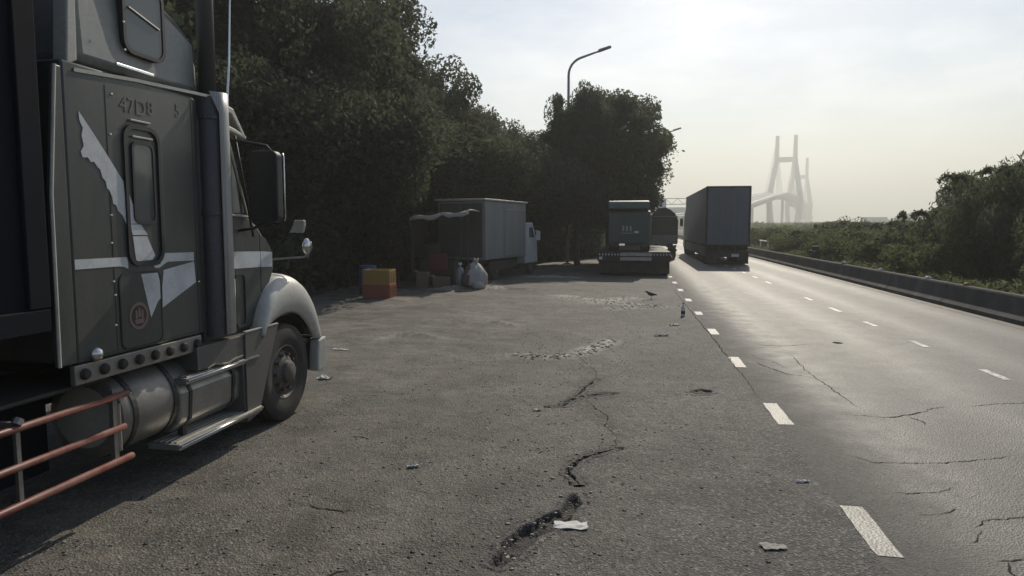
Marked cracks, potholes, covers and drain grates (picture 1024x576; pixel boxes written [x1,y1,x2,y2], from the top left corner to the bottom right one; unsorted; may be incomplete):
crack [854,455,1012,463]
pothole [478,490,588,573]
crack [549,362,621,487]
pothole [685,388,718,396]
crack [758,344,938,424]
